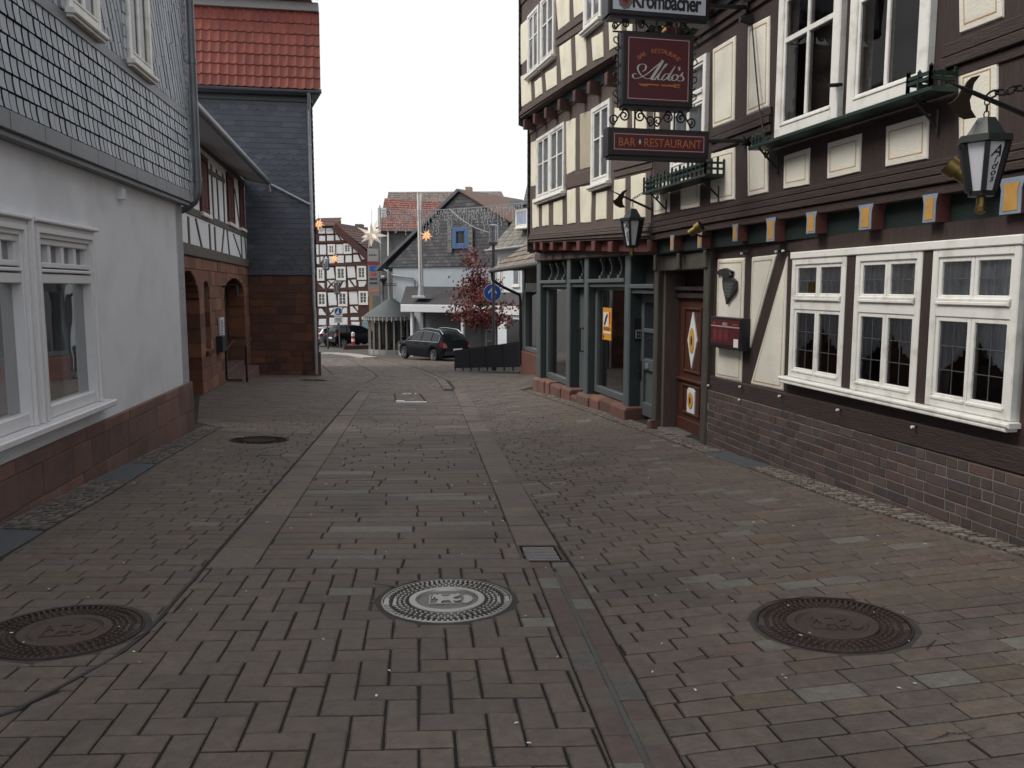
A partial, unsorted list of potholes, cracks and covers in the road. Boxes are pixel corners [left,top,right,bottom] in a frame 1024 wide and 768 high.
manhole cover [228,436,290,444]
manhole cover [369,577,520,630]
manhole cover [0,603,152,669]
drain grate [516,545,567,563]
manhole cover [748,597,924,661]
